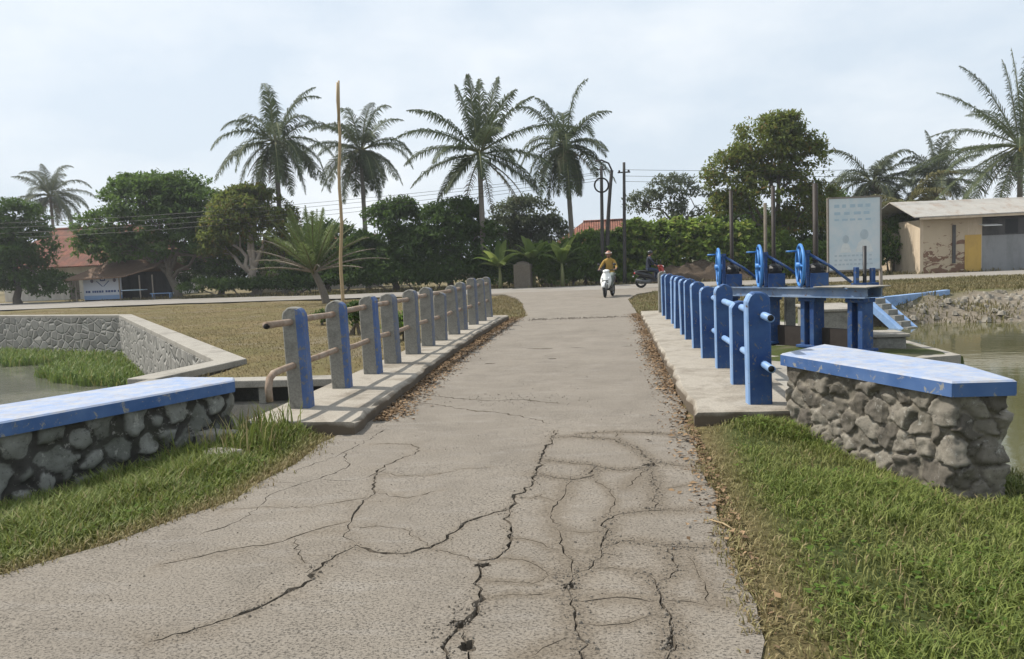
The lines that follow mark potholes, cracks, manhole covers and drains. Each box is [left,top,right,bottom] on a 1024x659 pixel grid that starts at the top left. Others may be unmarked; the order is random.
crack [150,394,558,659]
pothole [457,640,476,652]
crack [485,432,734,659]
